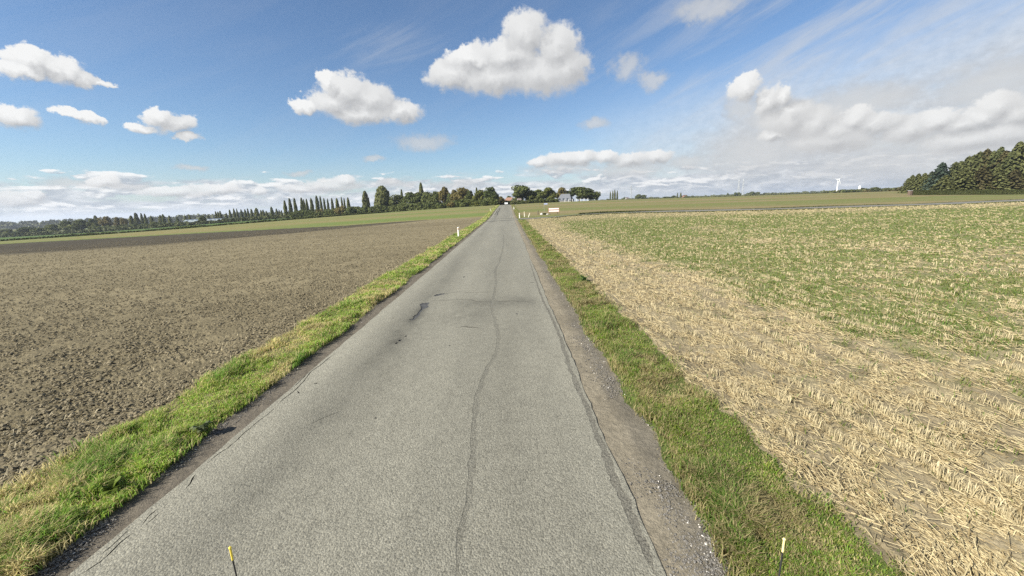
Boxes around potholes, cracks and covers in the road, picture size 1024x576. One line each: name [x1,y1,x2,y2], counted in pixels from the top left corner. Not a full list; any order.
crack [85,510,159,572]
